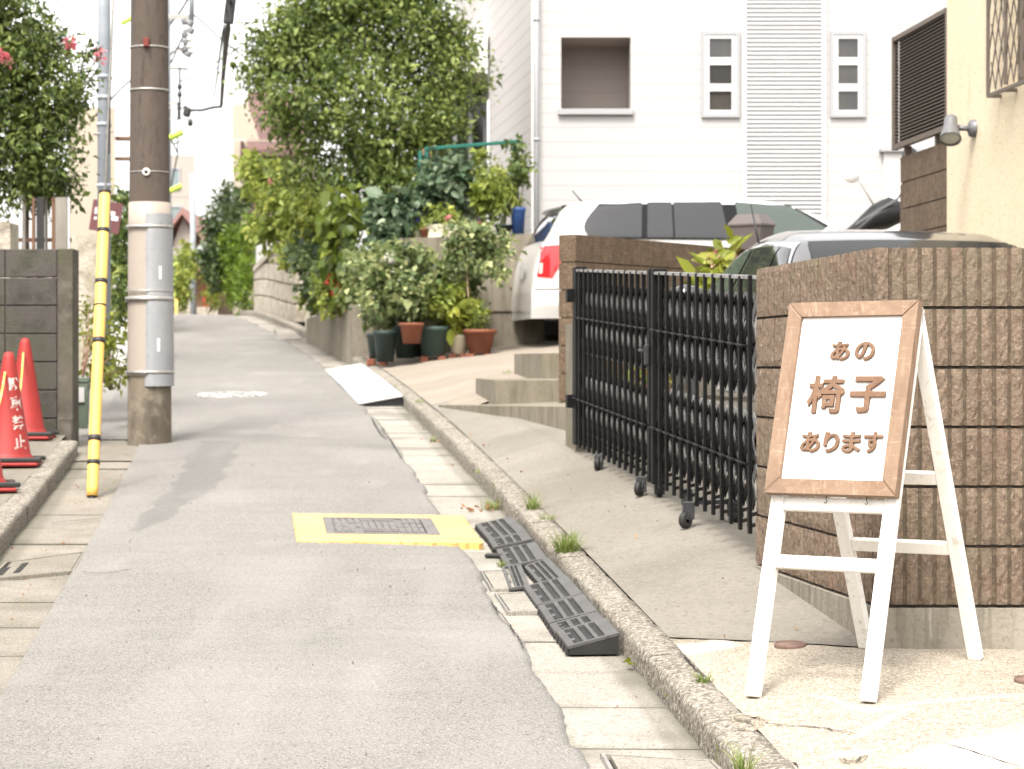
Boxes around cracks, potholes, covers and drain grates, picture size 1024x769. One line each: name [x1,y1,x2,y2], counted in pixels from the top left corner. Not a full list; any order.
crack [766,722,856,734]
manhole cover [774,640,807,649]
